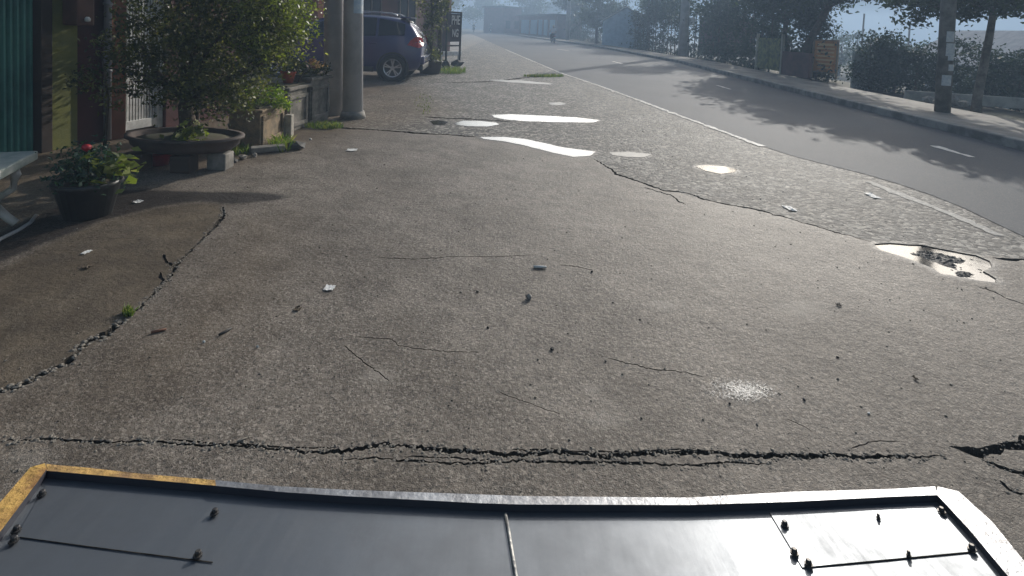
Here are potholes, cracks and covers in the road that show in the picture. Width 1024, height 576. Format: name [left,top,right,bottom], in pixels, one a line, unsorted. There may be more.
crack [596,160,870,242]
pothole [875,243,996,283]
crack [345,336,455,381]
crack [0,419,1024,495]
crack [0,206,229,393]
crack [608,358,702,377]
